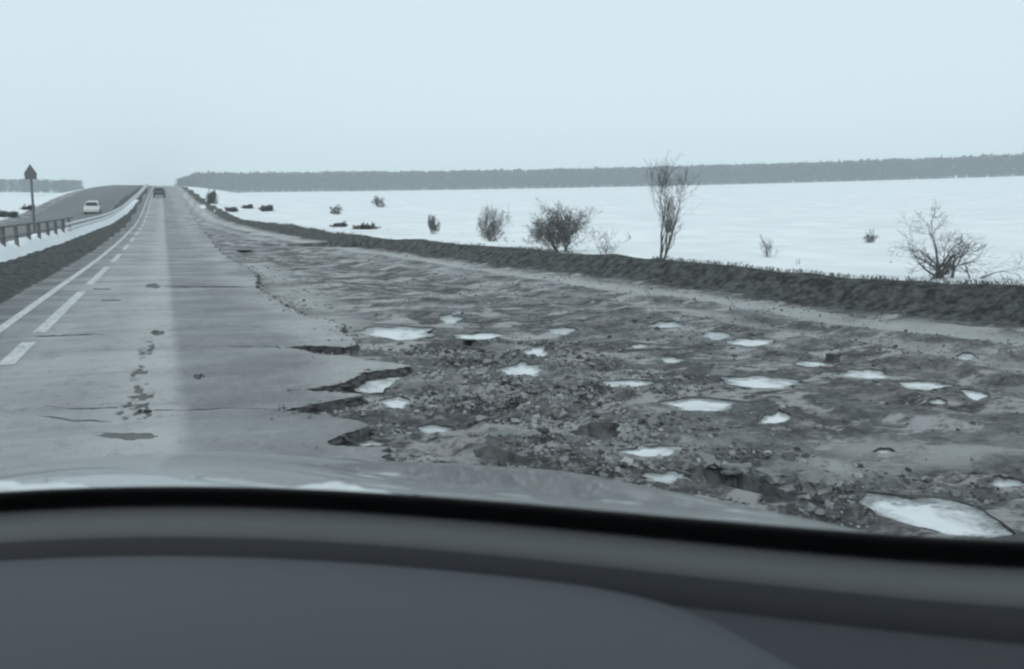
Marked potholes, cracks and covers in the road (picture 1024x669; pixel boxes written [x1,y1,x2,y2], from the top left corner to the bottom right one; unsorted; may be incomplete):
pothole [757,409,792,425]
pothole [359,438,387,446]
pothole [712,374,807,388]
pothole [450,332,511,343]
pothole [354,326,437,340]
pothole [616,444,683,456]
crack [38,334,277,422]
pothole [657,396,744,411]
pothole [496,359,545,376]
